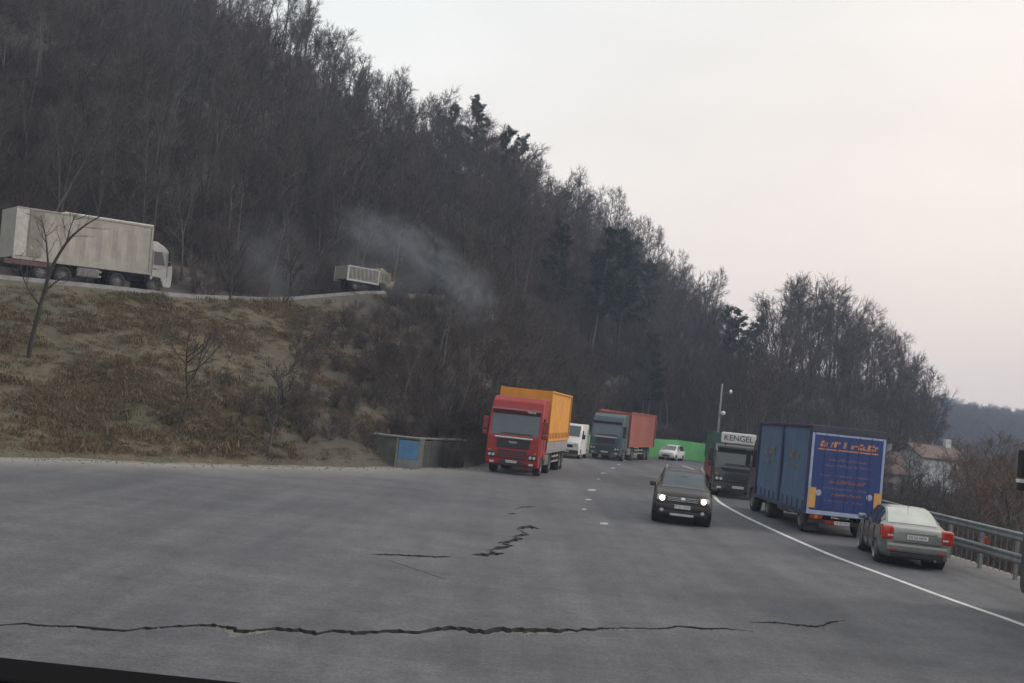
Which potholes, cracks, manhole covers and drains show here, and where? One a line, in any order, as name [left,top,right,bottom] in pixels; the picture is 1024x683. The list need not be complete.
crack [0,619,846,637]
crack [370,553,448,579]
crack [471,506,542,557]
